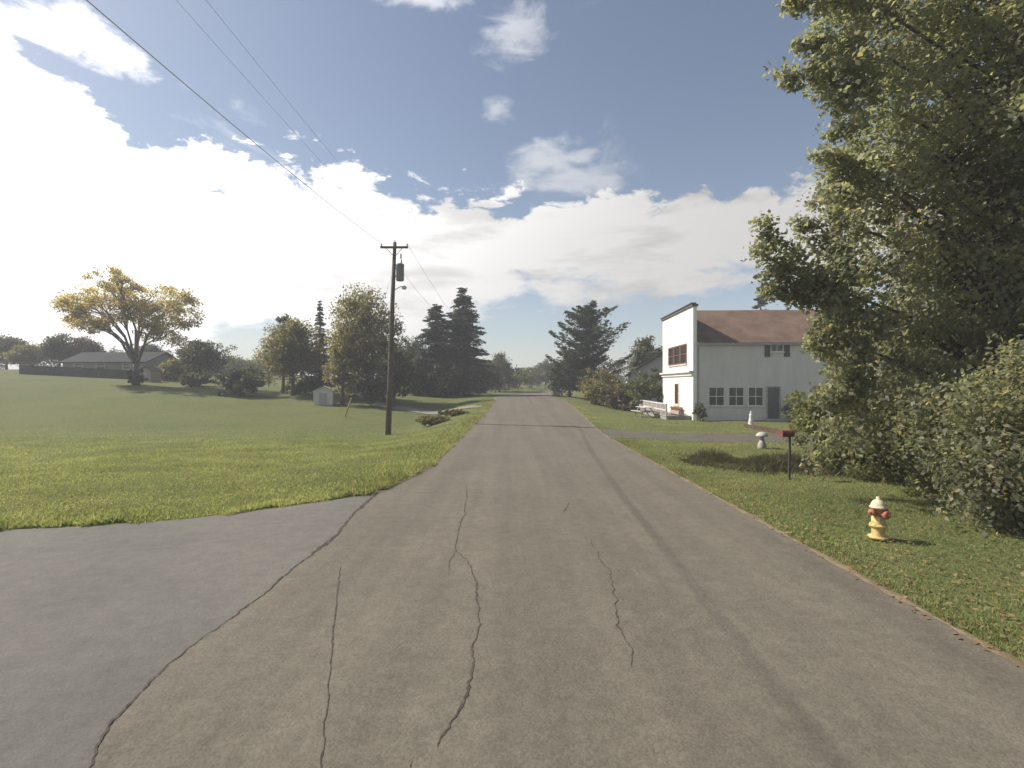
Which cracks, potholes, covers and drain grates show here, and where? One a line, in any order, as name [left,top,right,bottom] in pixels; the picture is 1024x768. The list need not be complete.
crack [320,565,341,768]
crack [437,469,481,747]
crack [590,539,635,672]
